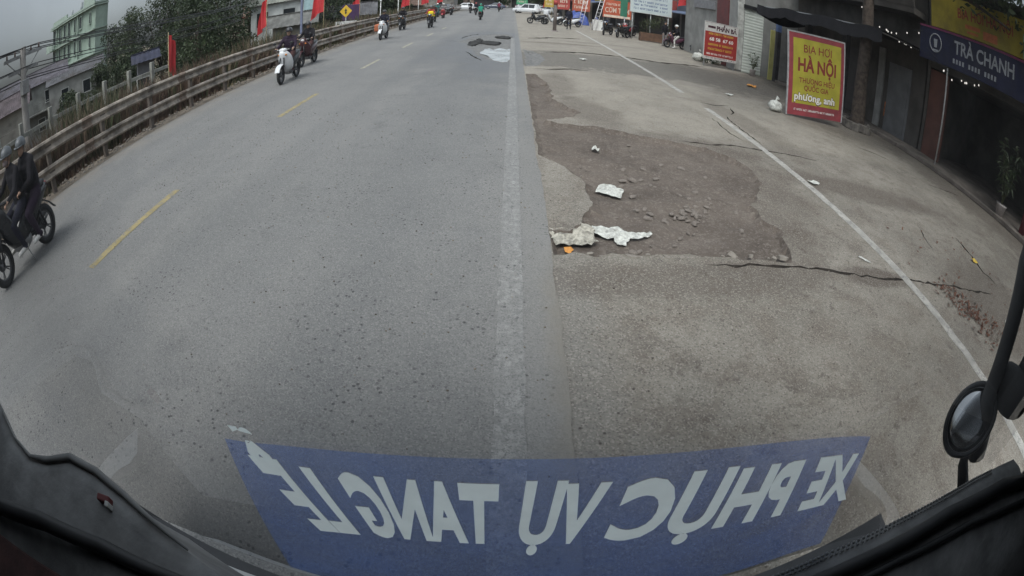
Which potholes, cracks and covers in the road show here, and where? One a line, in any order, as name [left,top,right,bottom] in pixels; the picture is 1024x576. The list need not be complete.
crack [685,102,815,161]
crack [708,241,992,294]
pothole [526,74,792,263]
